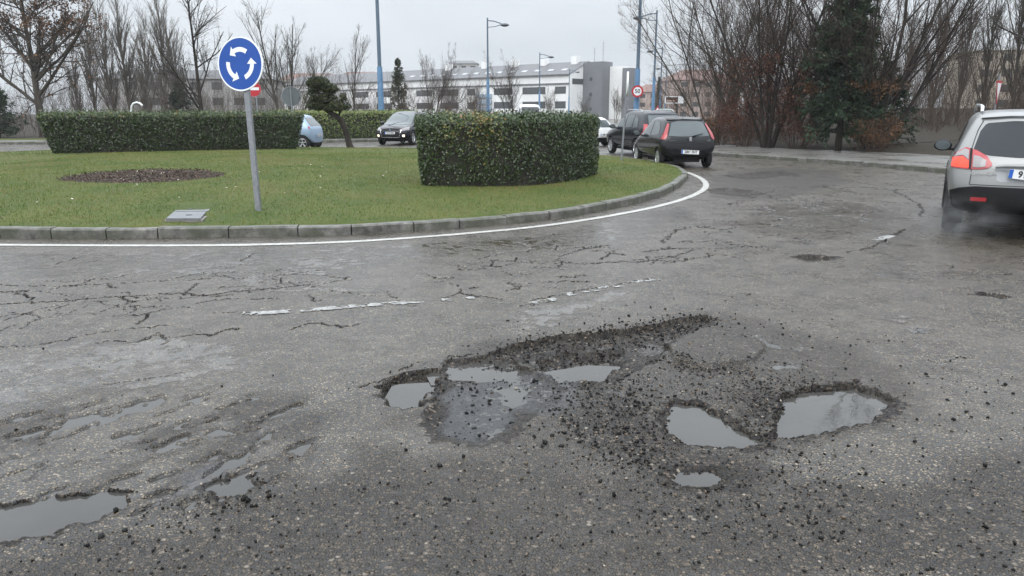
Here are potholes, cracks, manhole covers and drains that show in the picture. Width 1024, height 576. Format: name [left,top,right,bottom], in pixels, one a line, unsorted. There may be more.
pothole [417,351,569,448]
pothole [653,398,778,454]
pothole [790,254,845,262]
pothole [0,488,134,547]
crack [432,172,924,306]
pothole [769,379,912,443]
pothole [656,464,737,493]
crack [0,253,415,347]
pothole [193,472,269,509]
pothole [372,368,441,411]
pothole [491,314,719,391]
